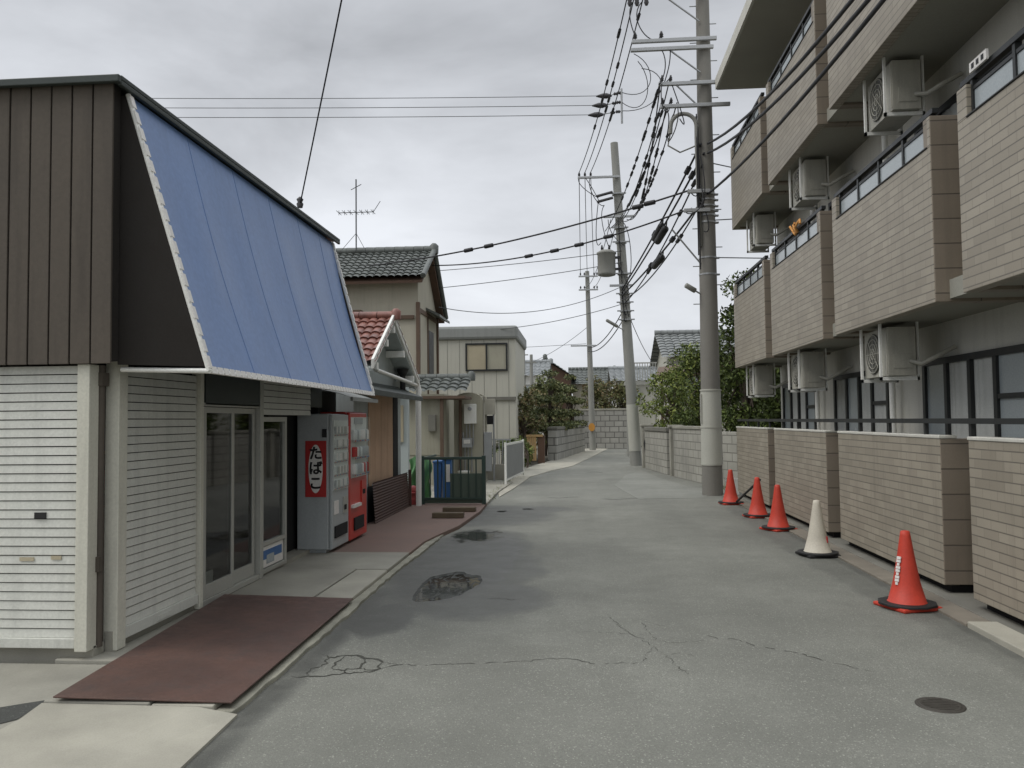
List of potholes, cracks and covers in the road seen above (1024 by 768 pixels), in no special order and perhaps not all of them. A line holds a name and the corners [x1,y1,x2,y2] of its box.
pothole [408,570,485,604]
manhole cover [914,697,967,714]
crack [291,655,633,677]
crack [588,614,701,674]
